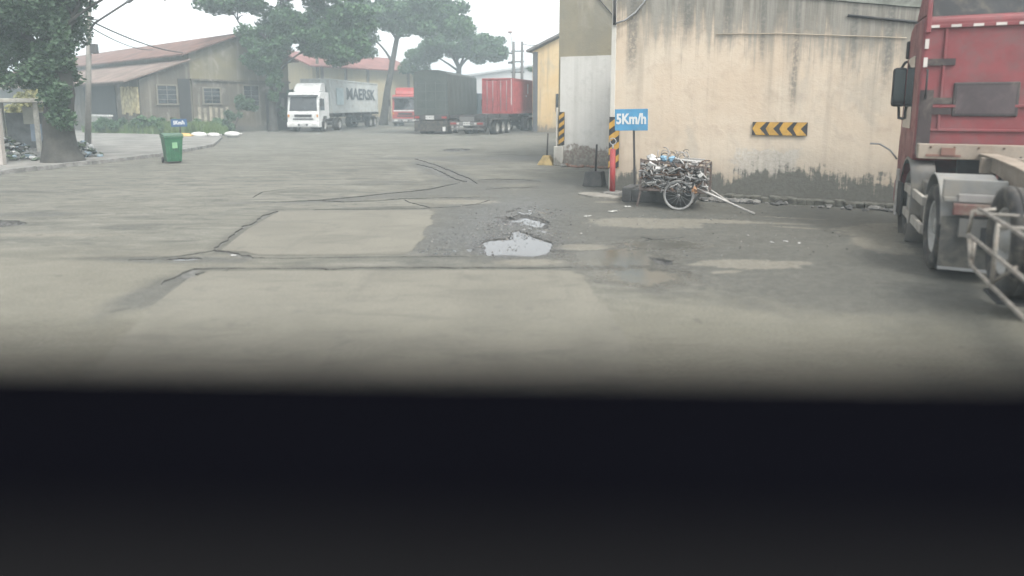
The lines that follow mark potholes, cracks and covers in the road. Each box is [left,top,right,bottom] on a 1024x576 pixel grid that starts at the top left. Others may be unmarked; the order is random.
pothole [649,257,673,265]
pothole [481,230,553,256]
pothole [493,214,551,228]
crack [134,159,573,285]
